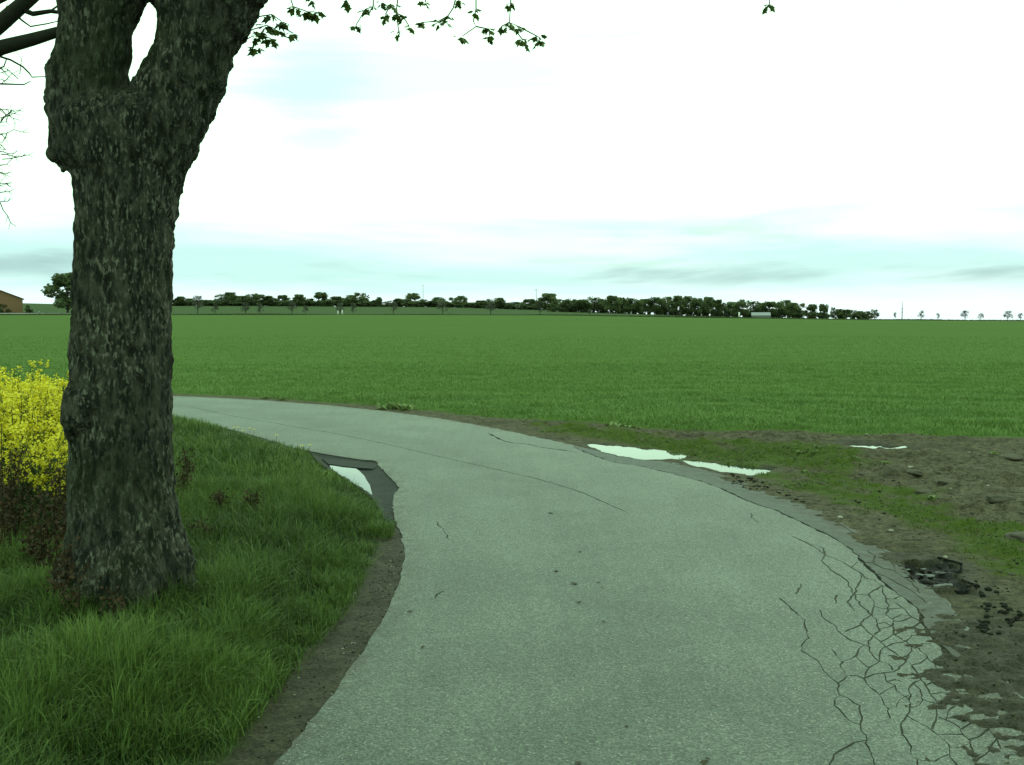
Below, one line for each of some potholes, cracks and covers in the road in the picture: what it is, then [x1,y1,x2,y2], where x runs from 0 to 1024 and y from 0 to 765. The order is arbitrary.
pothole [898,556,977,594]
crack [488,433,1002,765]
pothole [310,452,399,527]
